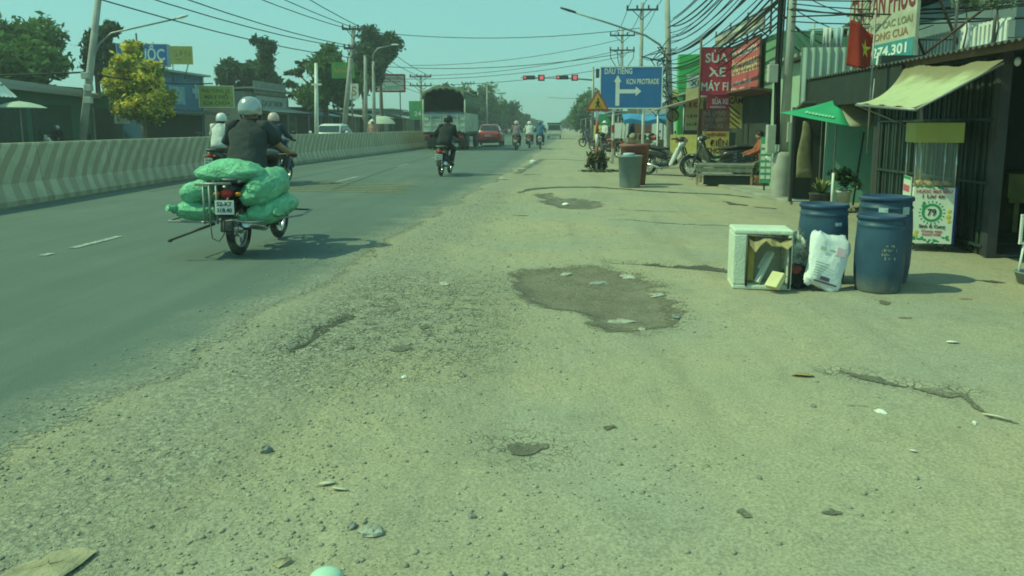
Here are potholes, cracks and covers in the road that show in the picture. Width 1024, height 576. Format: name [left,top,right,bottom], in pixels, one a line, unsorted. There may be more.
crack [289,316,356,352]
crack [839,371,1019,424]
pothole [510,265,686,332]
pothole [507,442,549,455]
crack [515,159,777,209]
pothole [536,193,605,209]
